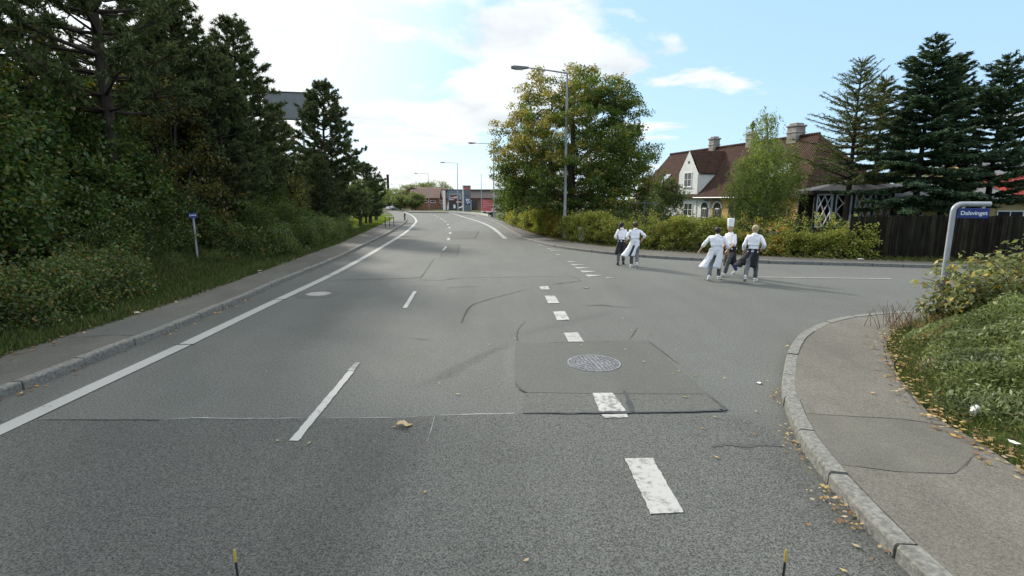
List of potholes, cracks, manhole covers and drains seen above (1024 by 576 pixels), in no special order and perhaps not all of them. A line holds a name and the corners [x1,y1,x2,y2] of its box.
manhole cover [295,290,341,298]
manhole cover [567,355,621,372]
